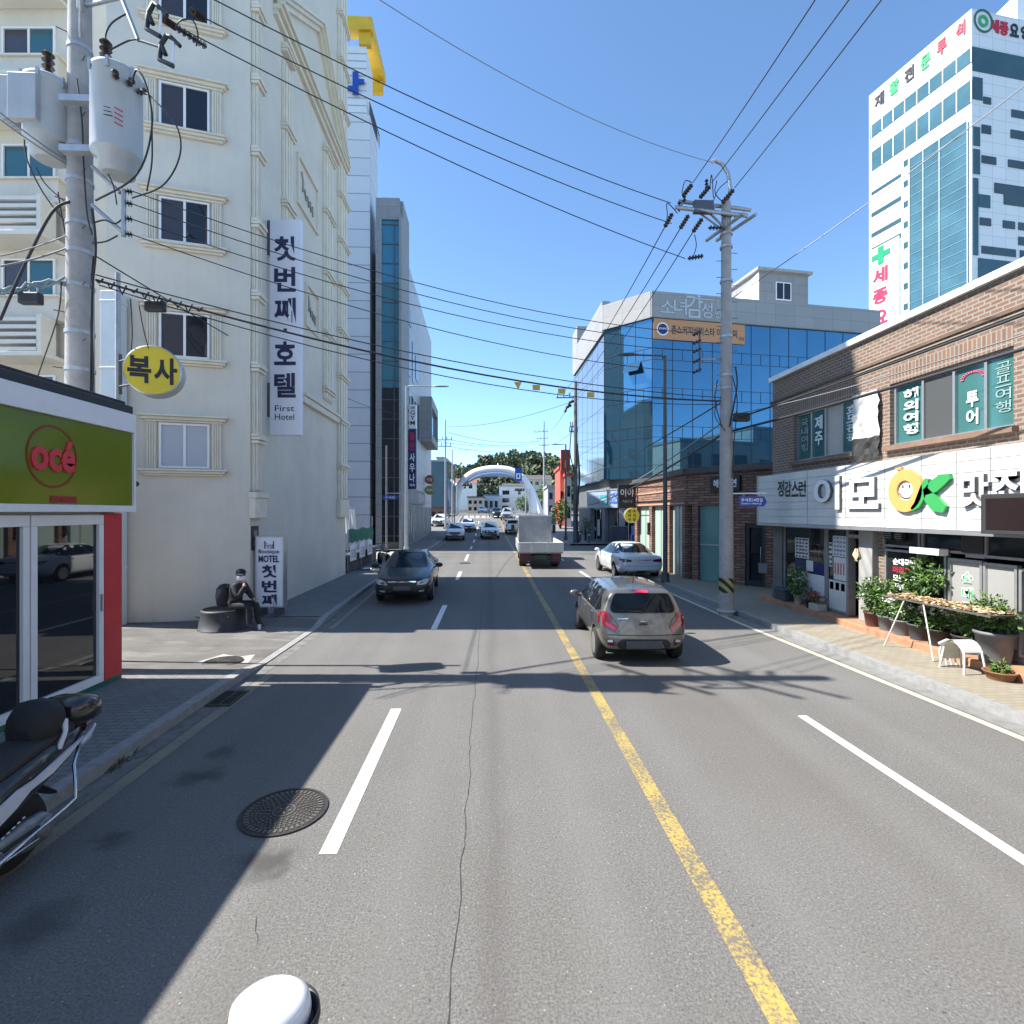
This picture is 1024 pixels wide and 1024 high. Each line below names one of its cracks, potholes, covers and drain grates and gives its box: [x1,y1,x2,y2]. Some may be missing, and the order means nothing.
drain grate [204,690,250,707]
crack [447,562,486,1024]
manhole cover [237,788,328,838]
